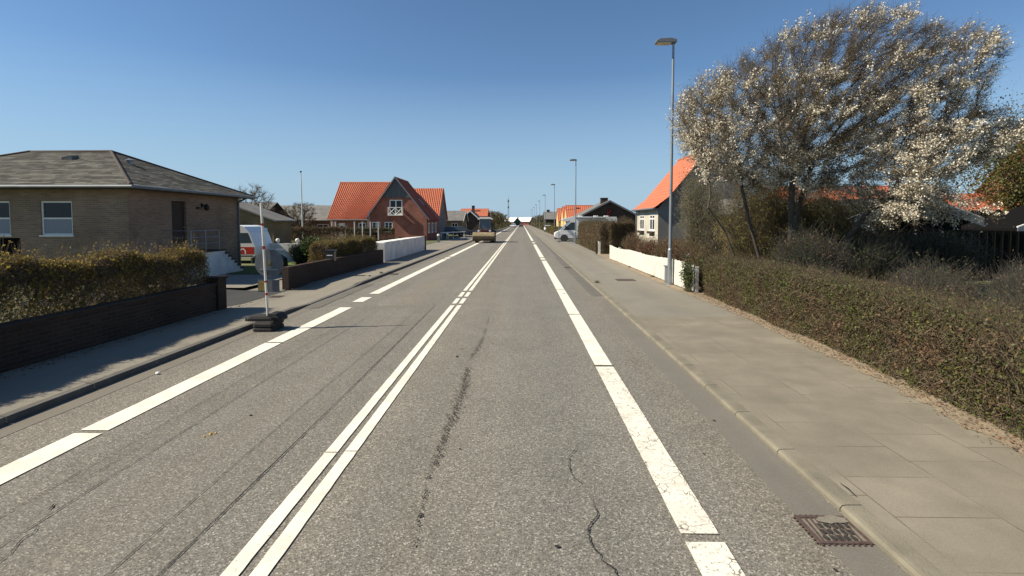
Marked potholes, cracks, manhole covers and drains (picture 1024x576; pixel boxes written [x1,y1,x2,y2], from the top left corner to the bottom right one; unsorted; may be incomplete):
crack [568,445,618,576]
drain grate [793,514,874,547]
